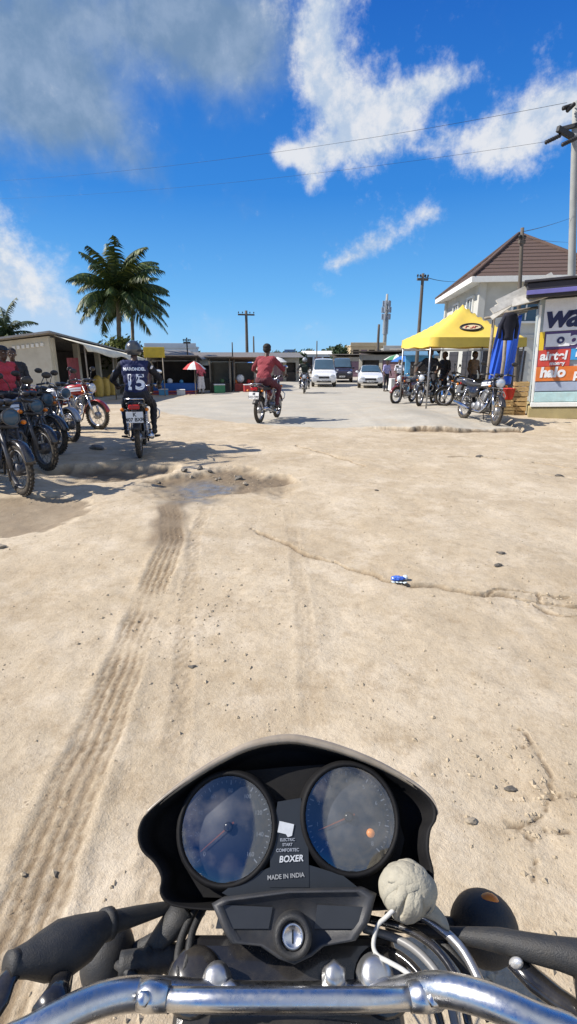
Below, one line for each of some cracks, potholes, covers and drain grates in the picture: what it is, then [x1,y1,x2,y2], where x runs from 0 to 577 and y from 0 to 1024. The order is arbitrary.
pothole [124,465,302,502]
crack [502,724,577,883]
crack [250,528,577,617]
